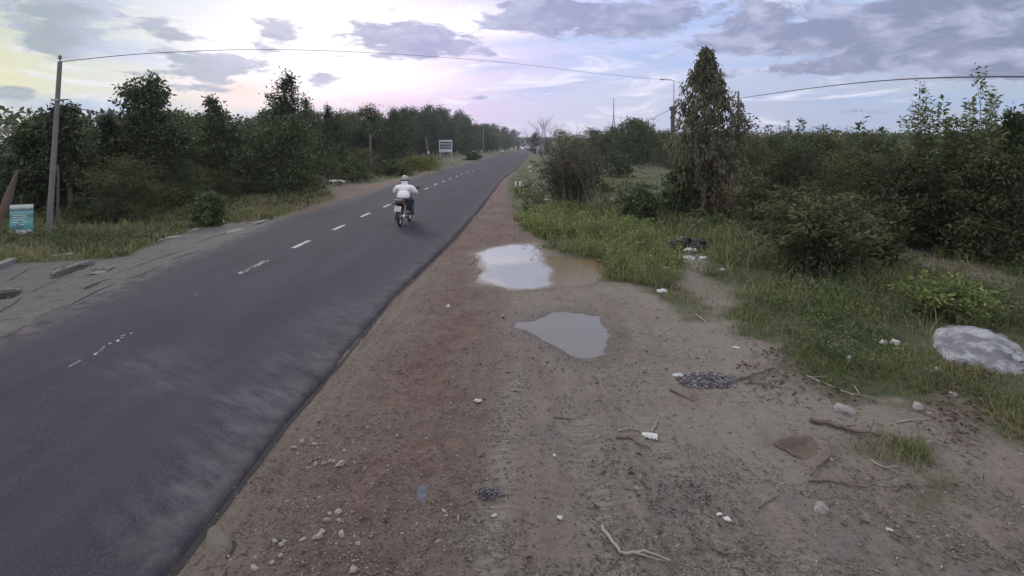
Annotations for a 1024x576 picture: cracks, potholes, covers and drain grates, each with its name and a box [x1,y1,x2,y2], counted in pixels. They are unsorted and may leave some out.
pothole [506,311,610,362]
pothole [474,243,605,291]
pothole [0,288,22,299]
